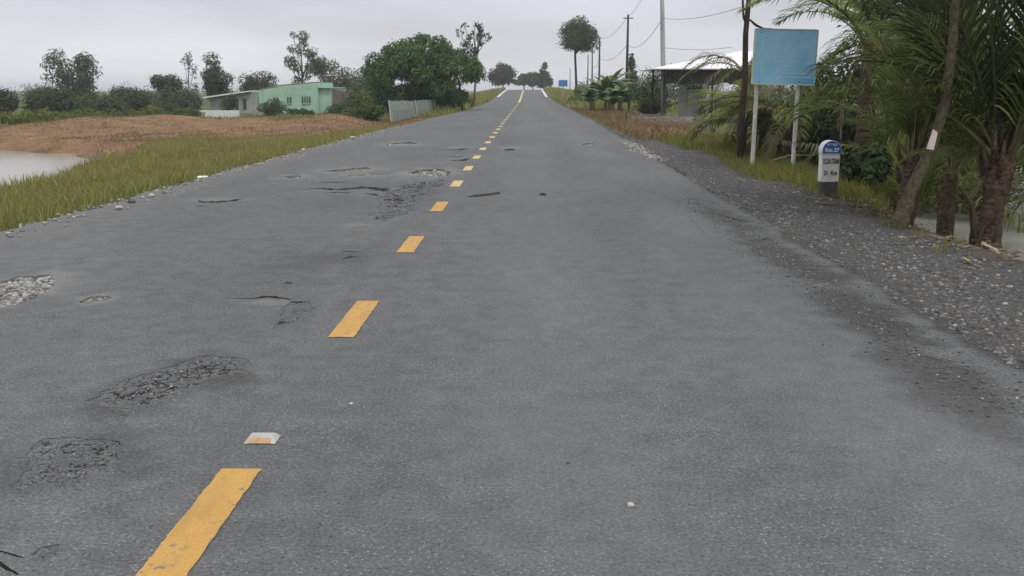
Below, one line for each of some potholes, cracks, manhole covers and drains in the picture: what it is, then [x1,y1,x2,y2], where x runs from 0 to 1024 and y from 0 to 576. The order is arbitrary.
pothole [0,274,56,307]
pothole [409,169,451,180]
crack [234,296,314,329]
crack [316,174,448,229]
